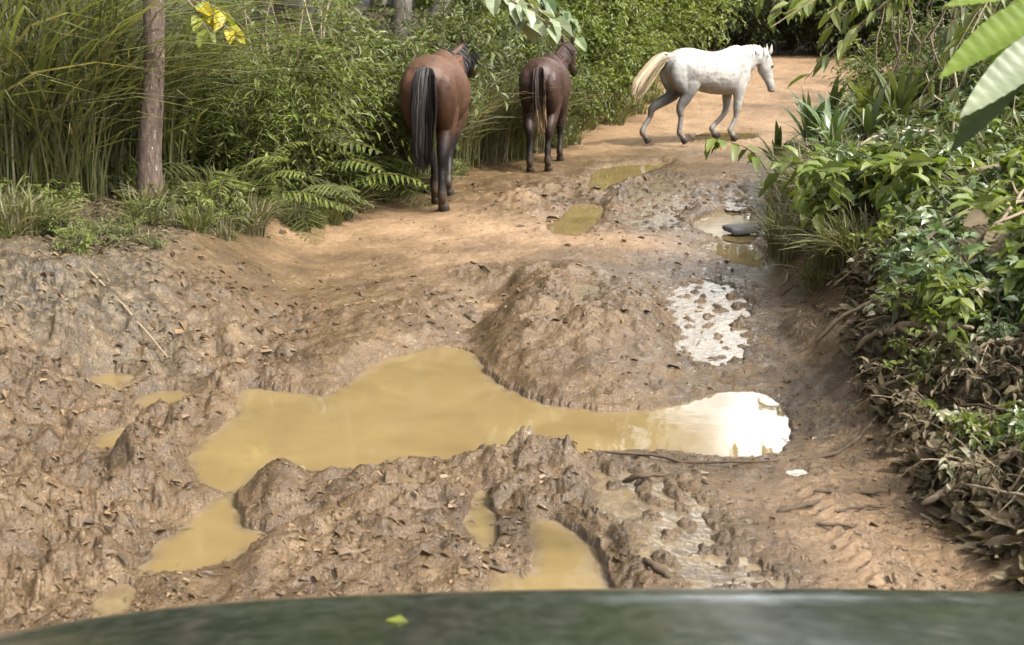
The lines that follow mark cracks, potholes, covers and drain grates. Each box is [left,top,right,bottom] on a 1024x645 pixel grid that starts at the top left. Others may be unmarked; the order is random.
pothole [188,346,791,495]
pothole [138,495,266,574]
pothole [586,162,669,190]
pothole [546,204,604,236]
pothole [489,519,611,591]
pothole [701,241,767,268]
pothole [463,490,498,548]
pothole [691,210,758,243]
